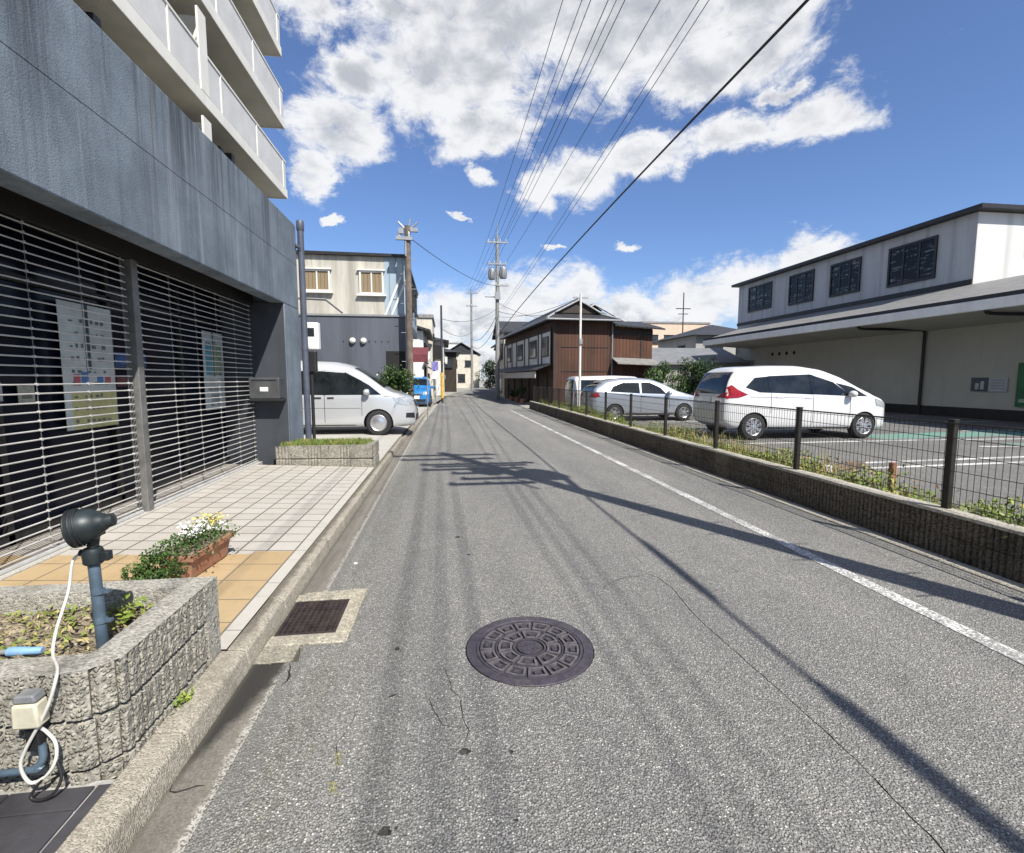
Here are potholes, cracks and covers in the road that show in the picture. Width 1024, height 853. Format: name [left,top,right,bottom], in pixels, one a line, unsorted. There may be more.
drain grate [254,588,368,679]
crack [429,667,470,746]
manhole cover [466,616,594,687]
pothole [376,826,392,836]
